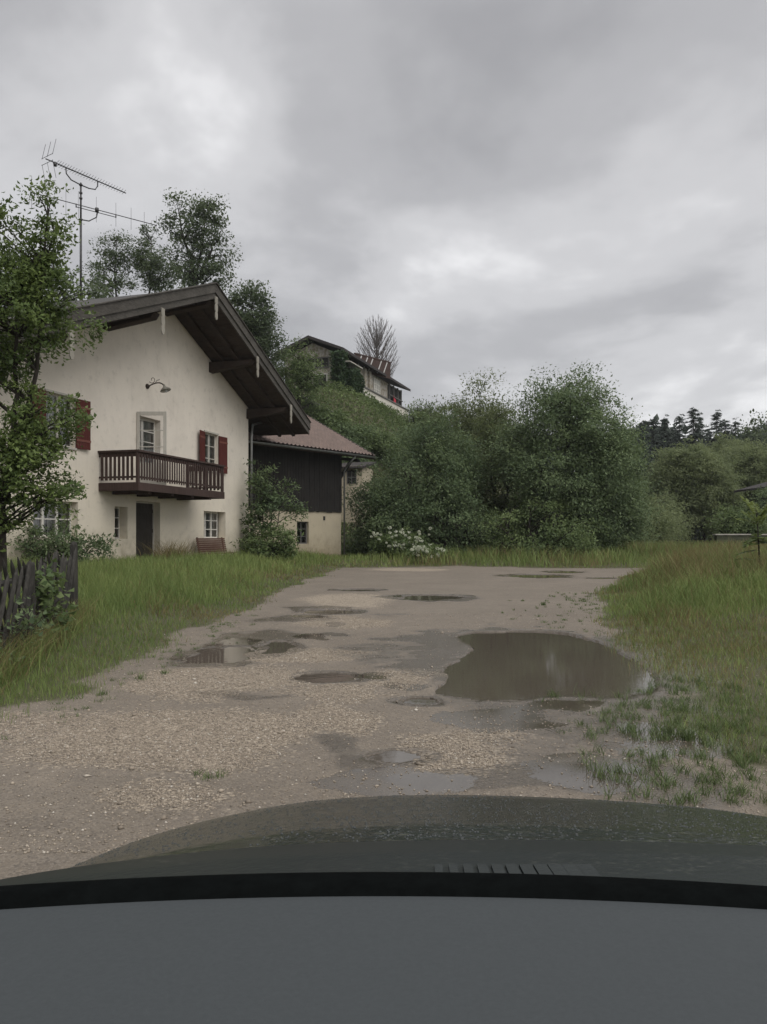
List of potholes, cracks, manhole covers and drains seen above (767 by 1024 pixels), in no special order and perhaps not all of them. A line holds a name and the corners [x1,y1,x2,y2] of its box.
pothole [171,645,270,665]
pothole [289,670,362,684]
pothole [395,696,441,705]
pothole [423,630,669,703]
pothole [362,748,425,765]
